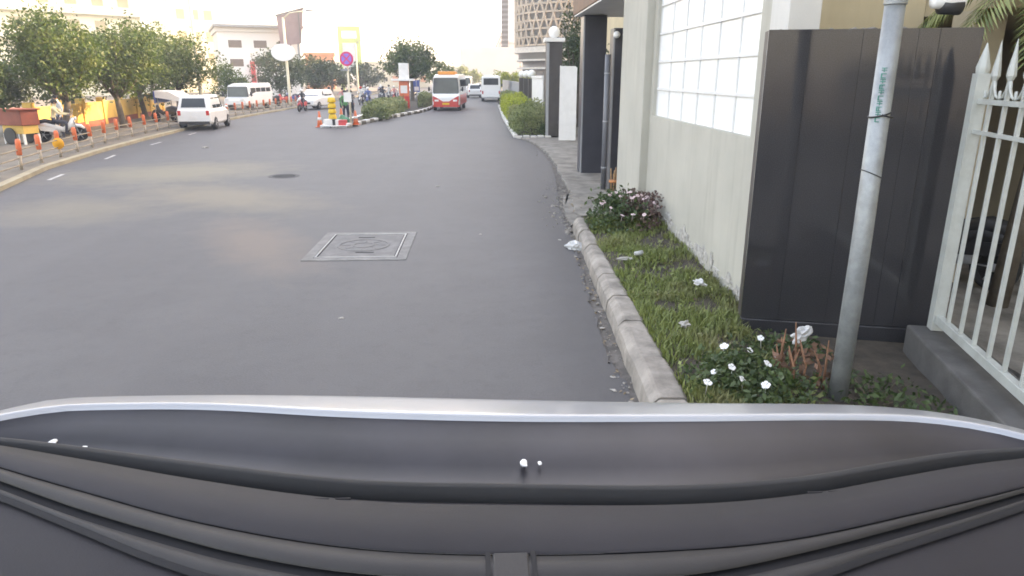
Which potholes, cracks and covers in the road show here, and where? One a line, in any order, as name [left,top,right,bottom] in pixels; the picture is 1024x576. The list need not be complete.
manhole cover [301,232,417,261]
